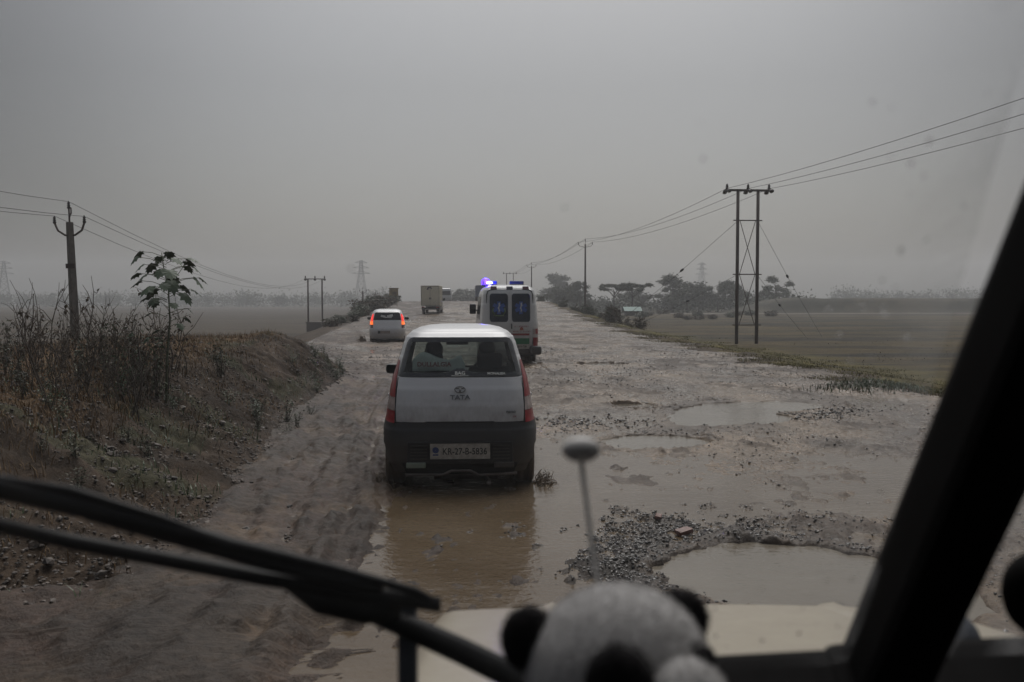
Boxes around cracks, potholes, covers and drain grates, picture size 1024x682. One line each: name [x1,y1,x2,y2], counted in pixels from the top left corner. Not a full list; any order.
pothole [653,397,837,430]
pothole [627,524,1024,636]
pothole [593,431,722,452]
